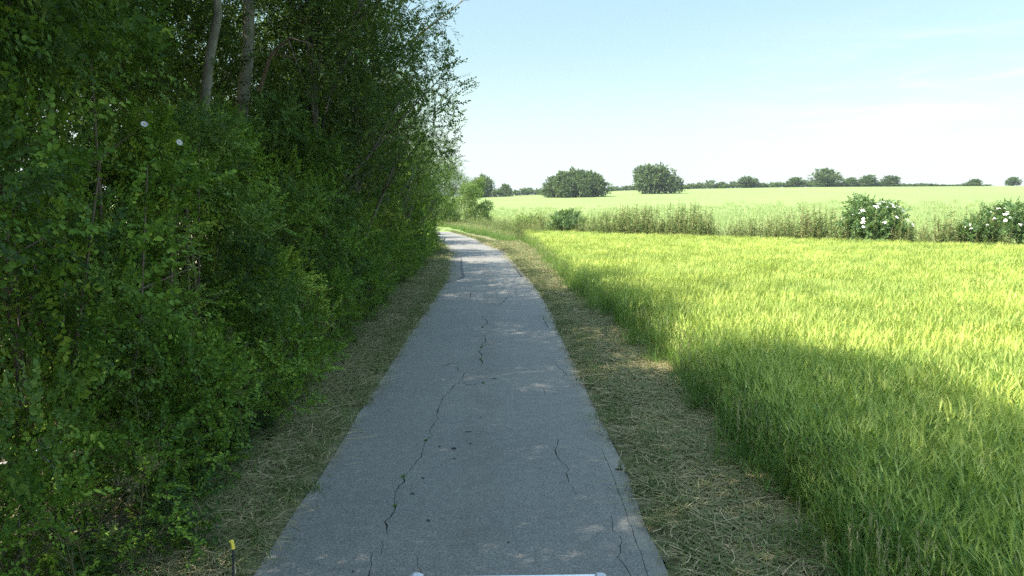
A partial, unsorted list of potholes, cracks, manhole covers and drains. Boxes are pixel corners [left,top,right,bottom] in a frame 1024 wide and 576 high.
crack [597,433,648,576]
crack [368,290,516,576]
